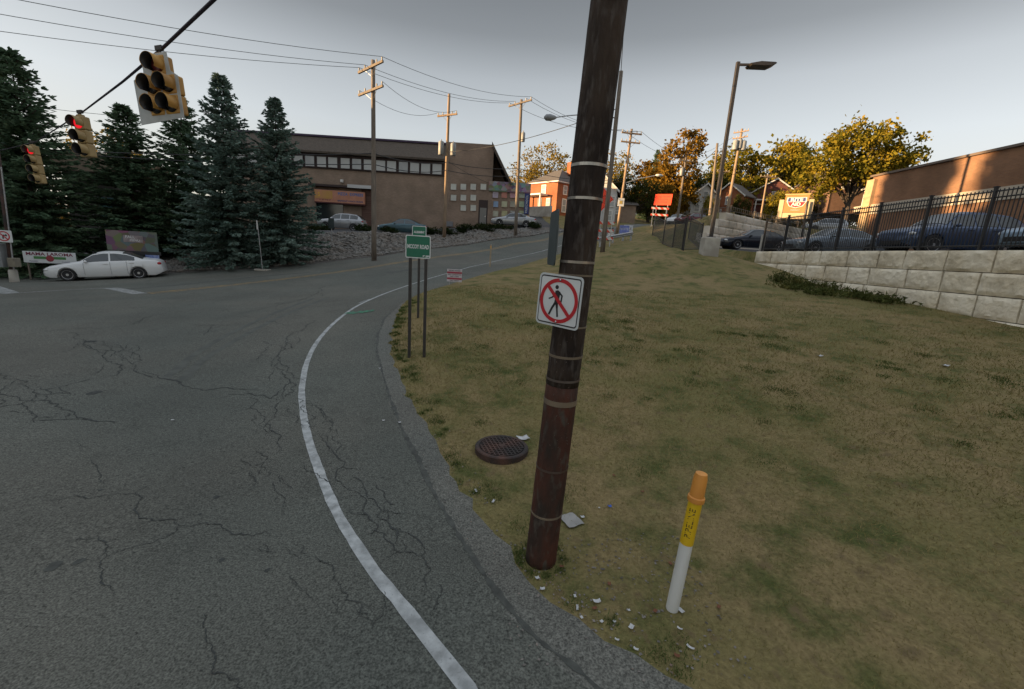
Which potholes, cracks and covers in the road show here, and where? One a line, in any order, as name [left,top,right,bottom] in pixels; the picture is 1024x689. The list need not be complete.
manhole cover [475,435,528,465]
crack [202,614,241,689]
crack [0,311,443,613]
